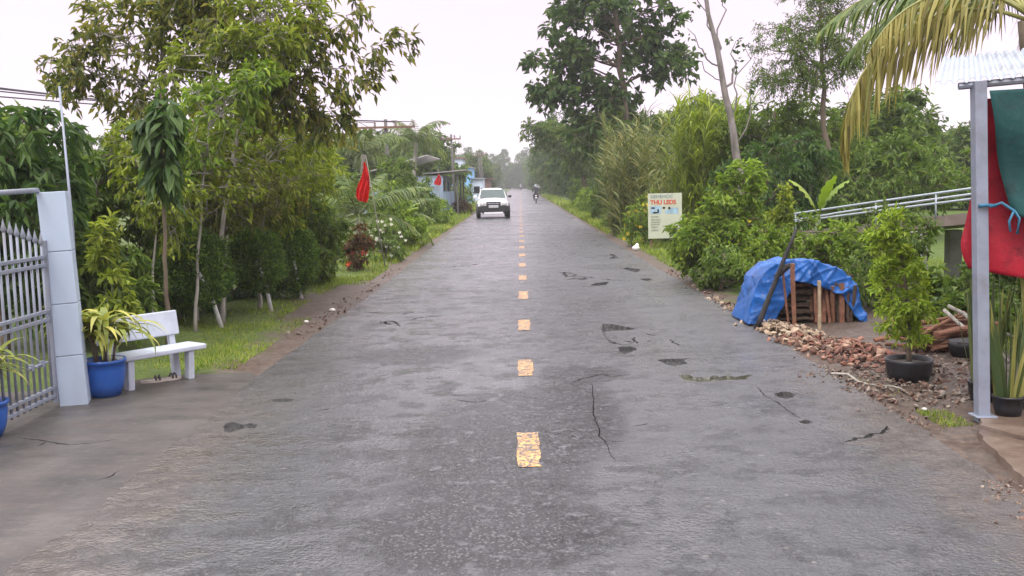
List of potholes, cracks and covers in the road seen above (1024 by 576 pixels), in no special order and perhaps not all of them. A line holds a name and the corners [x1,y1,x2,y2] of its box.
pothole [601,324,636,344]
crack [552,374,647,461]
pothole [658,358,689,366]
crack [23,438,113,446]
pothole [223,422,257,433]
crack [845,426,889,442]
pothole [679,374,753,382]
pothole [774,391,796,399]
